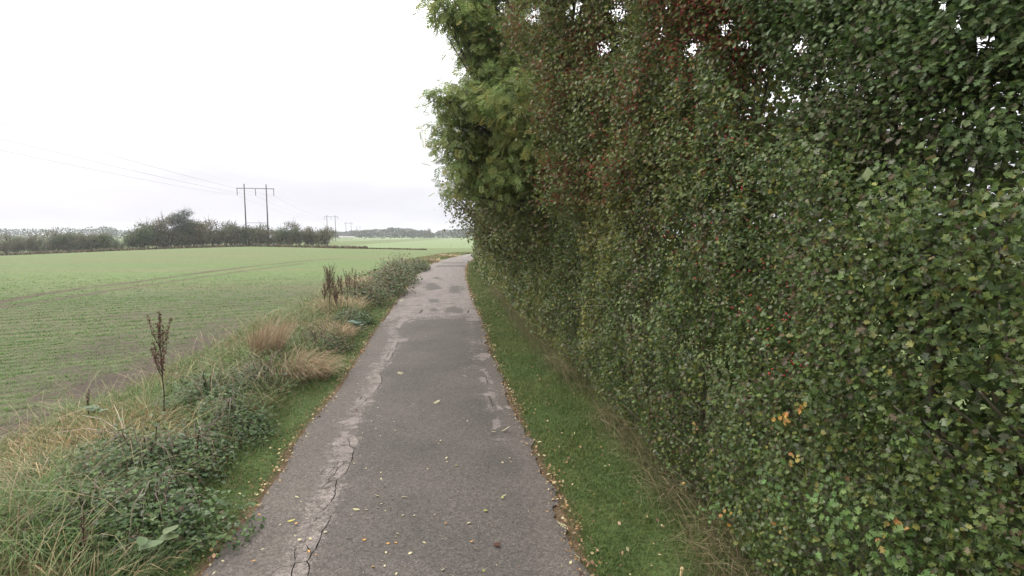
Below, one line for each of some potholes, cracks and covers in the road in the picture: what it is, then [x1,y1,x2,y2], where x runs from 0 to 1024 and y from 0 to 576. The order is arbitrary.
crack [275,442,354,576]
